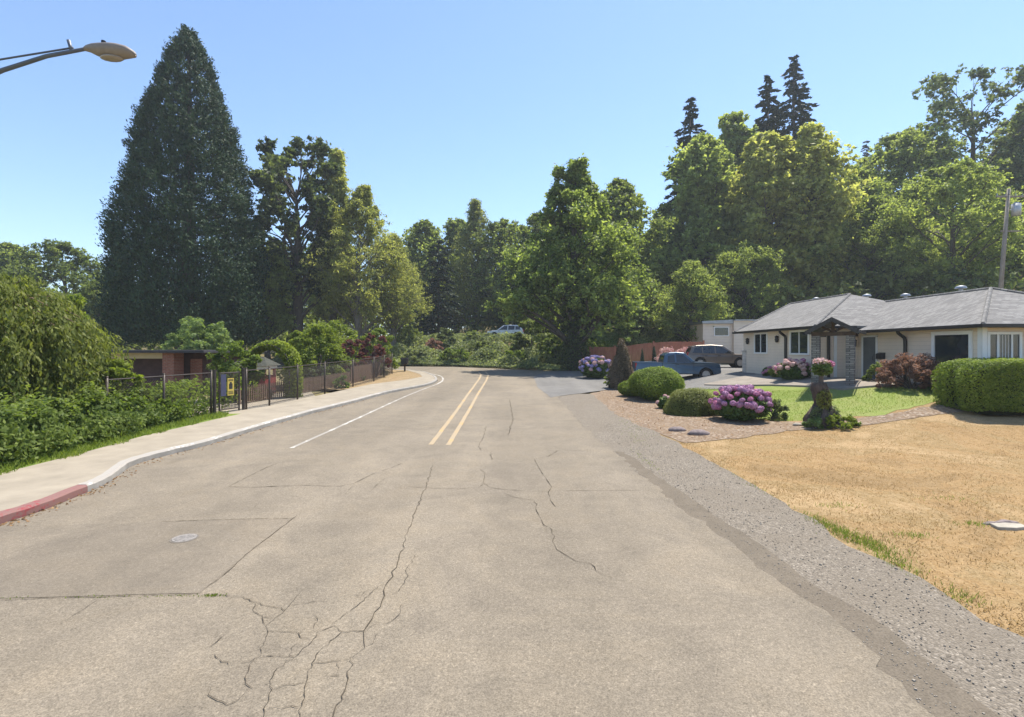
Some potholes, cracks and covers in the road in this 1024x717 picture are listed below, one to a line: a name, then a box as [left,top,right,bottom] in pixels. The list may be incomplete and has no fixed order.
crack [208,466,433,717]
manhole cover [169,533,200,543]
crack [508,461,607,576]
